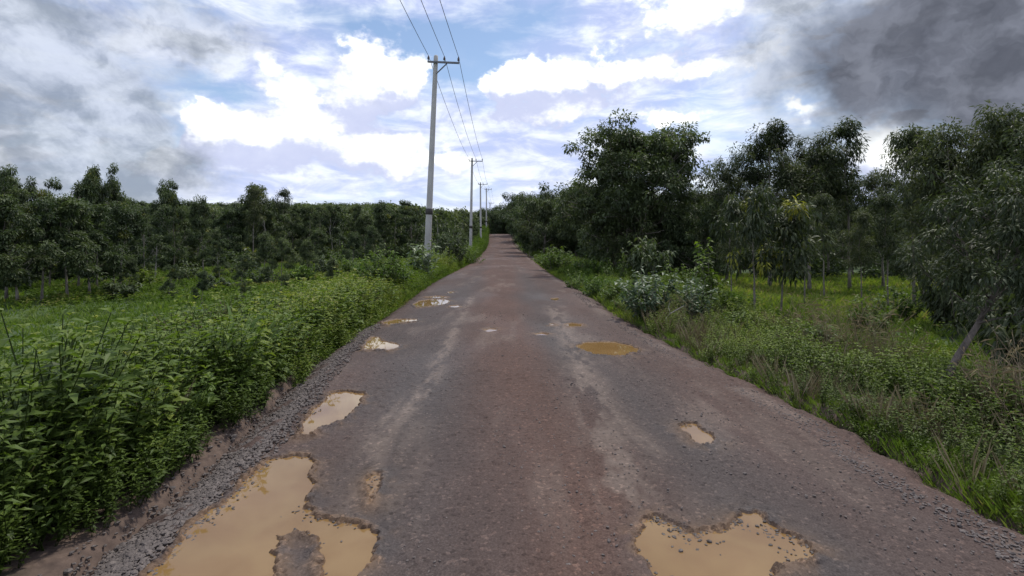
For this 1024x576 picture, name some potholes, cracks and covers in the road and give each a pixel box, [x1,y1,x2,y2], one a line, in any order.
pothole [411,298,453,308]
pothole [380,318,420,326]
pothole [360,336,405,352]
pothole [138,451,387,576]
pothole [672,420,723,448]
pothole [623,507,829,576]
pothole [293,389,370,441]
pothole [573,340,641,357]
